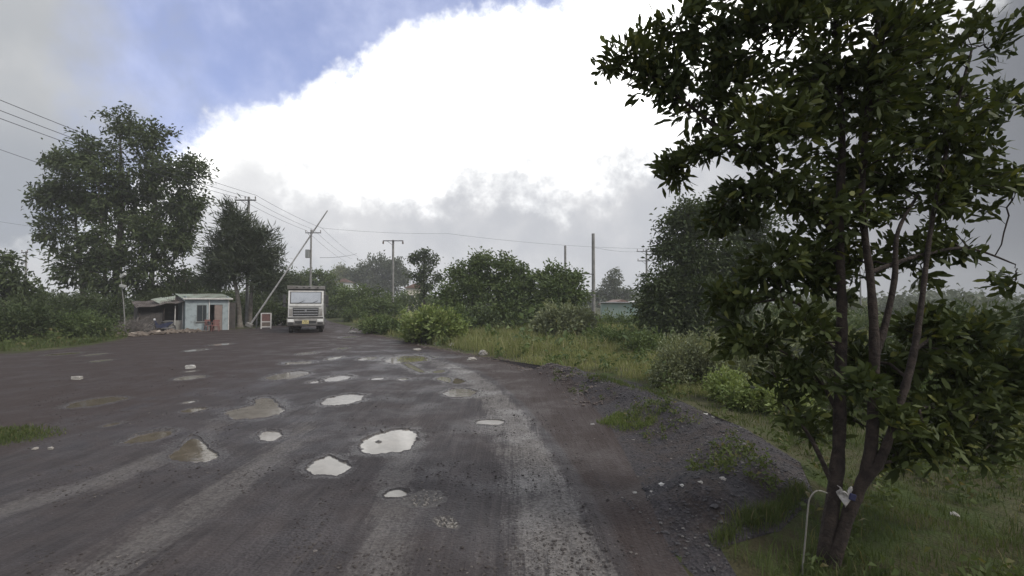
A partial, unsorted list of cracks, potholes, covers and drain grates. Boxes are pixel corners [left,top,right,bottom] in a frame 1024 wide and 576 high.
pothole [431,515,461,530]
pothole [318,374,354,382]
pothole [381,487,412,499]
pothole [442,388,479,398]
pothole [319,393,367,406]
pothole [264,370,311,380]
pothole [165,434,221,463]
pothole [117,428,179,444]
pothole [61,396,130,409]
pothole [380,354,434,364]
pothole [357,428,421,455]
